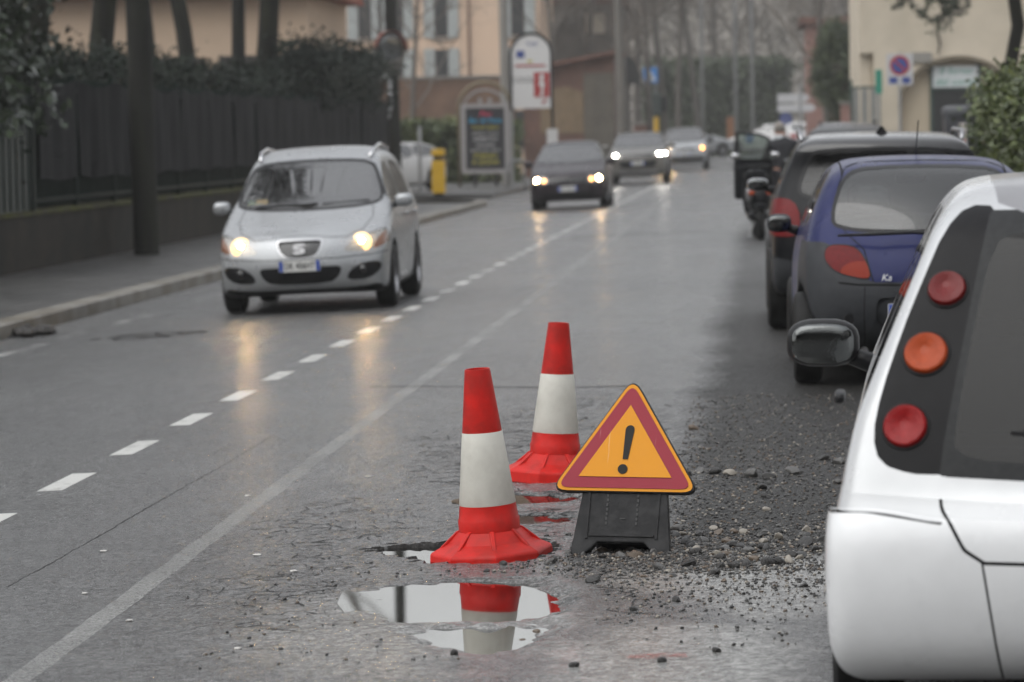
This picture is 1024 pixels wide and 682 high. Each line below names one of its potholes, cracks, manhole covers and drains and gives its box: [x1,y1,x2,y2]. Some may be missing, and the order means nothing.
pothole [354,538,567,564]
pothole [342,573,596,656]
